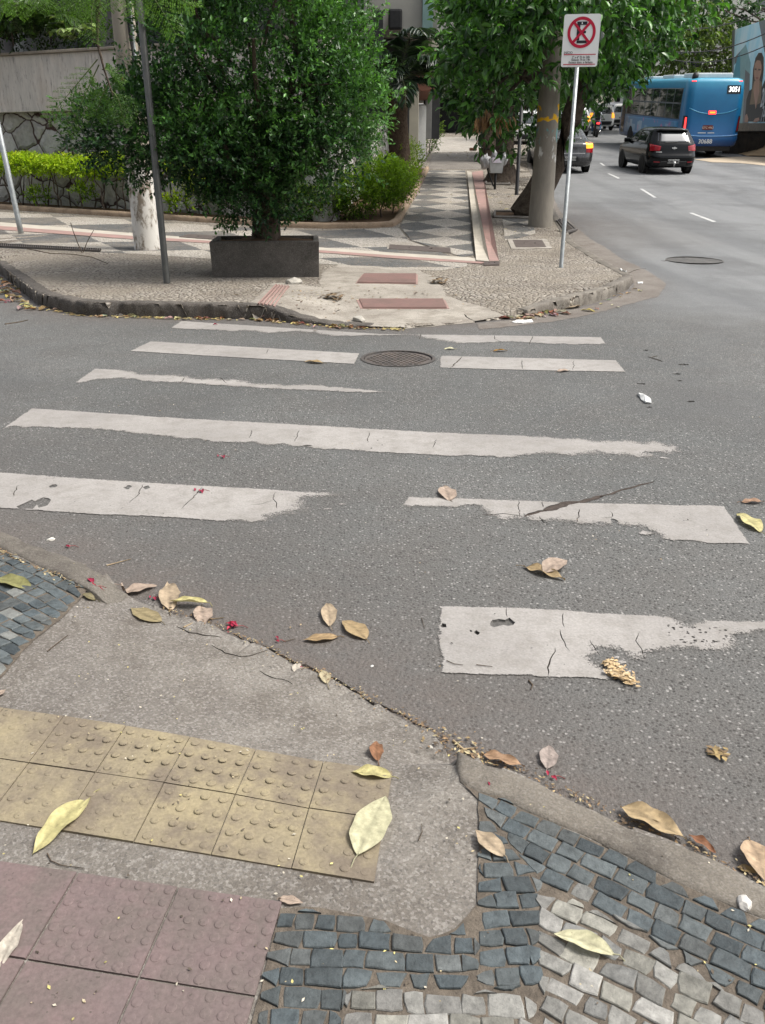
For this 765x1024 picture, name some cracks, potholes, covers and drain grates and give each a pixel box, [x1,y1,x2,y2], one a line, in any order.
crack [485,481,654,523]
utility cover [507,239,552,249]
manhole cover [361,350,435,367]
